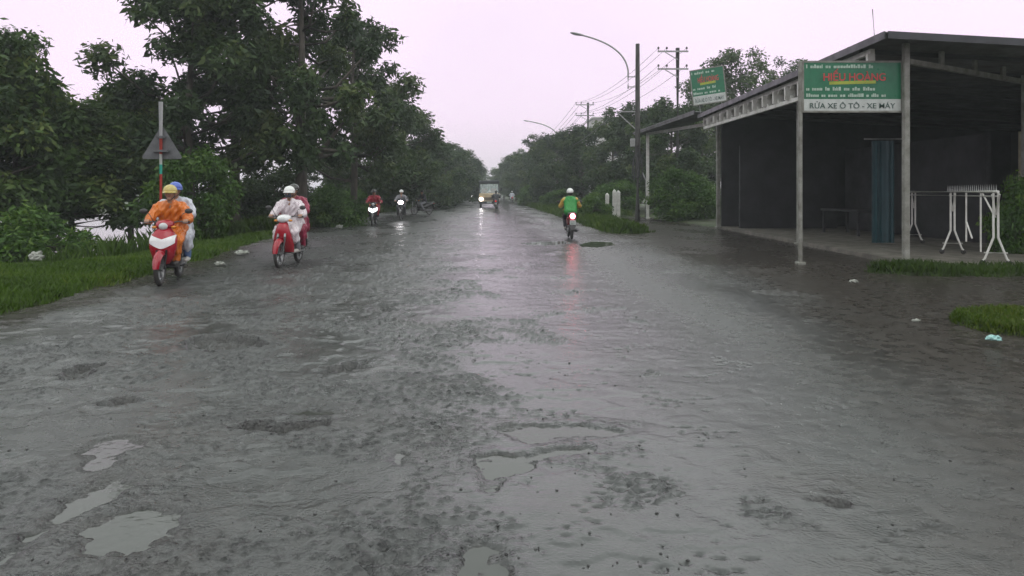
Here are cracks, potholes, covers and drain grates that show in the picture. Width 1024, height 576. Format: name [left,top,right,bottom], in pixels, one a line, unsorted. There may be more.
pothole [0,469,140,565]
pothole [95,394,143,407]
pothole [809,488,853,508]
pothole [72,504,190,557]
pothole [55,362,107,381]
pothole [468,445,598,493]
pothole [490,422,626,444]
pothole [578,240,618,248]
pothole [72,434,149,471]
pothole [317,359,372,376]
pothole [227,418,339,435]
pothole [452,537,515,576]
